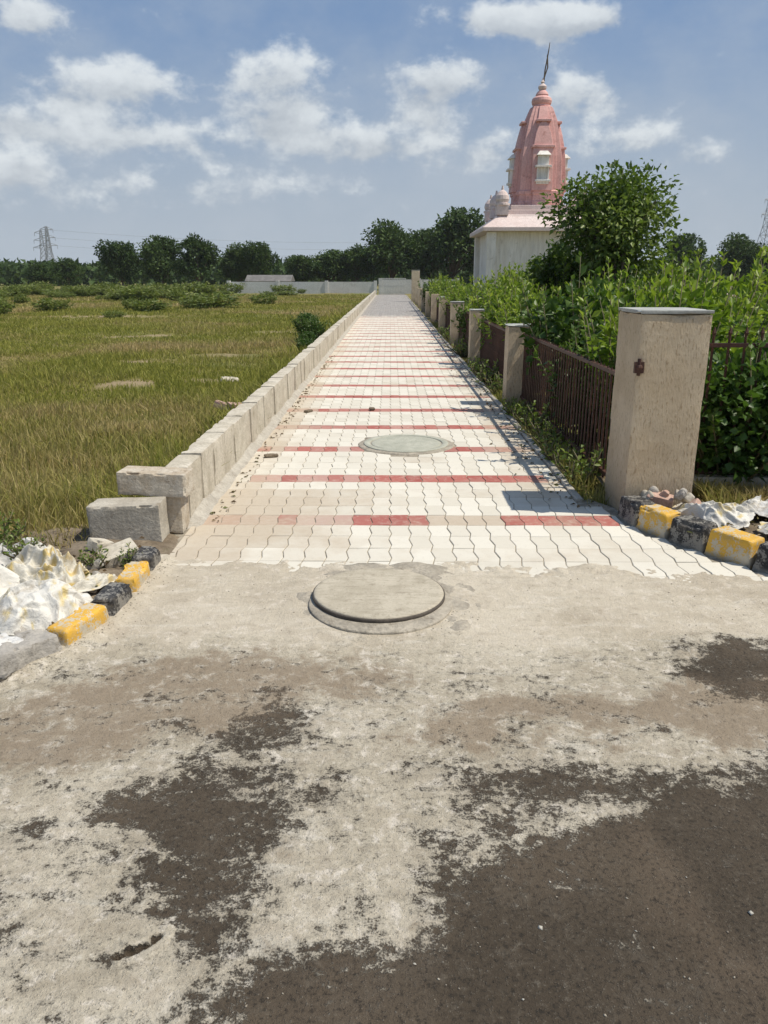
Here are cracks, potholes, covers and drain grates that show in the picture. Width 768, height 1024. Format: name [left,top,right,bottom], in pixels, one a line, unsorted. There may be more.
manhole cover [296,562,481,635]
manhole cover [358,434,454,456]
pothole [99,924,176,967]
